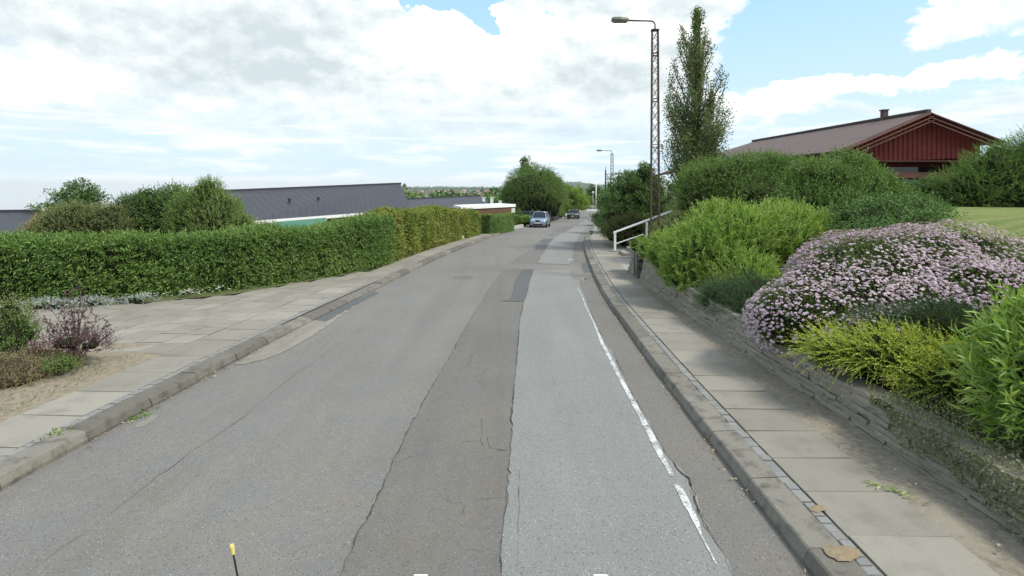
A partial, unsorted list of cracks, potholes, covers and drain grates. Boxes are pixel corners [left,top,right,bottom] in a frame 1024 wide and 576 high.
crack [673,462,721,551]
